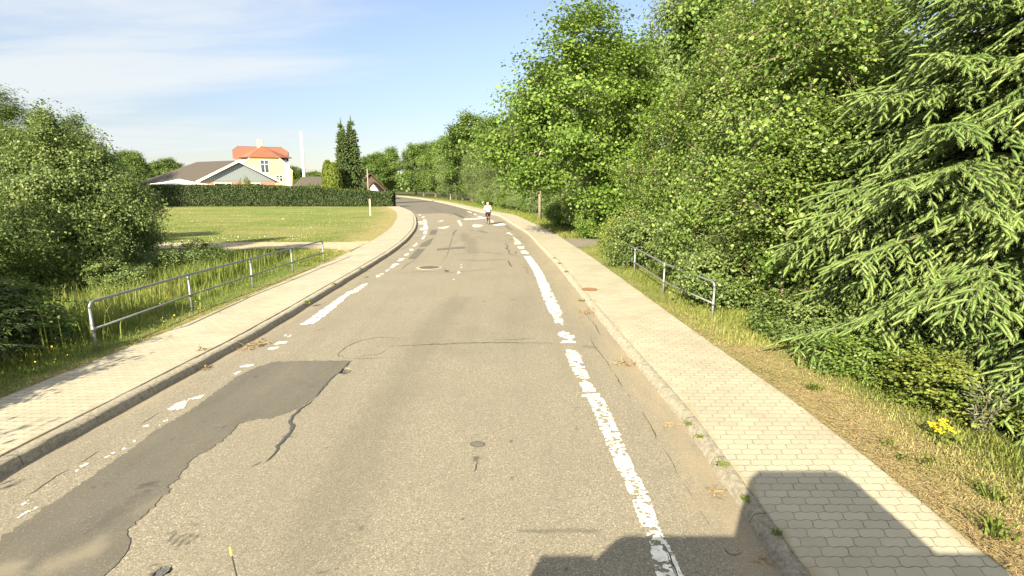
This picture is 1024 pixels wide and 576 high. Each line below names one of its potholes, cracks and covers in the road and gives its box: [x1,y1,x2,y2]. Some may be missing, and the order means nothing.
crack [338,337,531,359]
